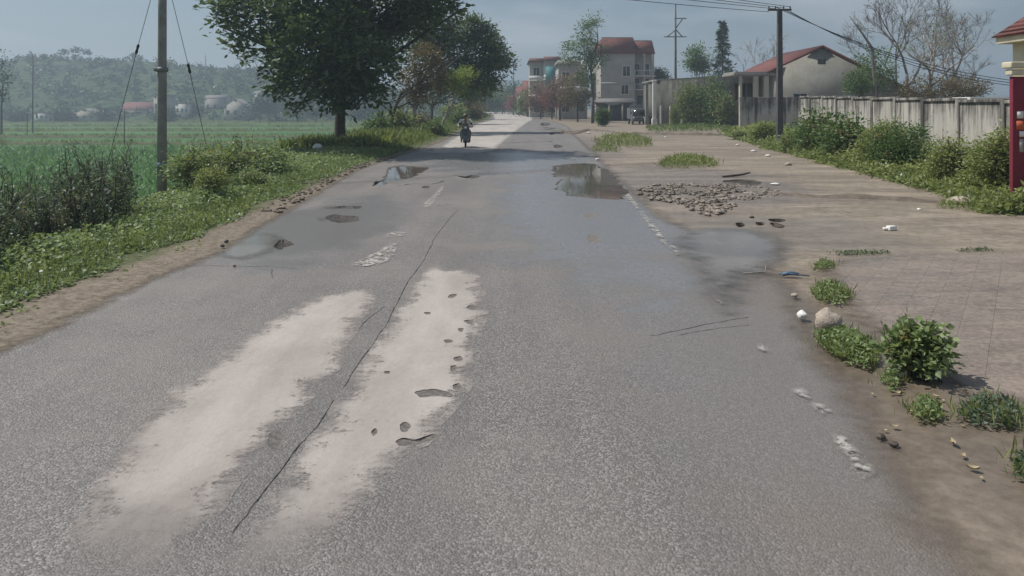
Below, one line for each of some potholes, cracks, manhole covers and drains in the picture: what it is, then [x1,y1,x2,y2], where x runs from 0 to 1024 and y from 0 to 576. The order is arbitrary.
pothole [274,239,294,250]
pothole [415,389,454,397]
pothole [396,435,438,446]
crack [186,266,293,278]
crack [232,399,335,534]
pothole [325,214,360,223]
